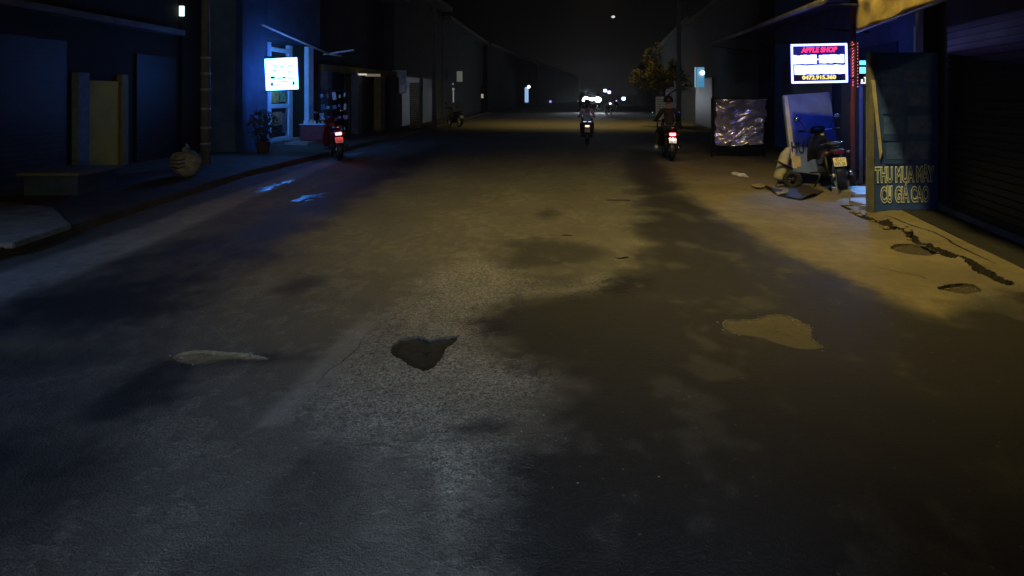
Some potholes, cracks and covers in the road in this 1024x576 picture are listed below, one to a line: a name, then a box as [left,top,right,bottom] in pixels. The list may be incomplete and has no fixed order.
pothole [937,283,981,294]
crack [840,205,1014,285]
pothole [390,335,459,371]
pothole [890,244,936,256]
